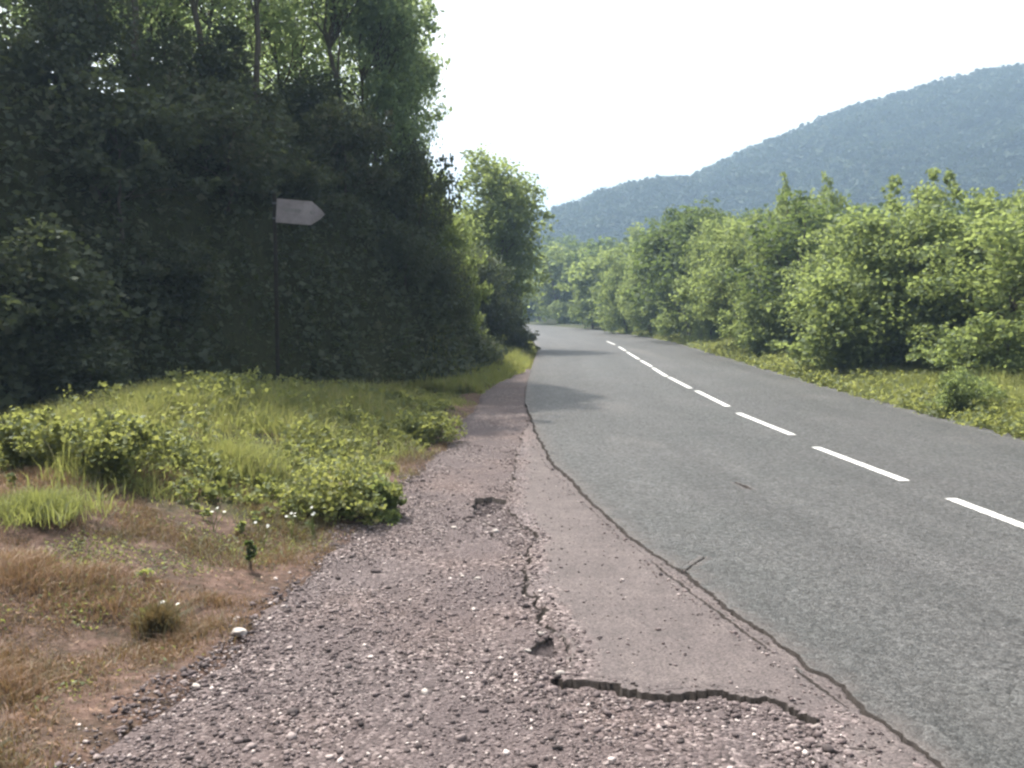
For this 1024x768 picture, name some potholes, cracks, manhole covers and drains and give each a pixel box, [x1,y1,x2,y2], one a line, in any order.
crack [730,482,757,490]
pothole [521,632,581,661]
pothole [467,496,511,518]
crack [453,517,869,756]
